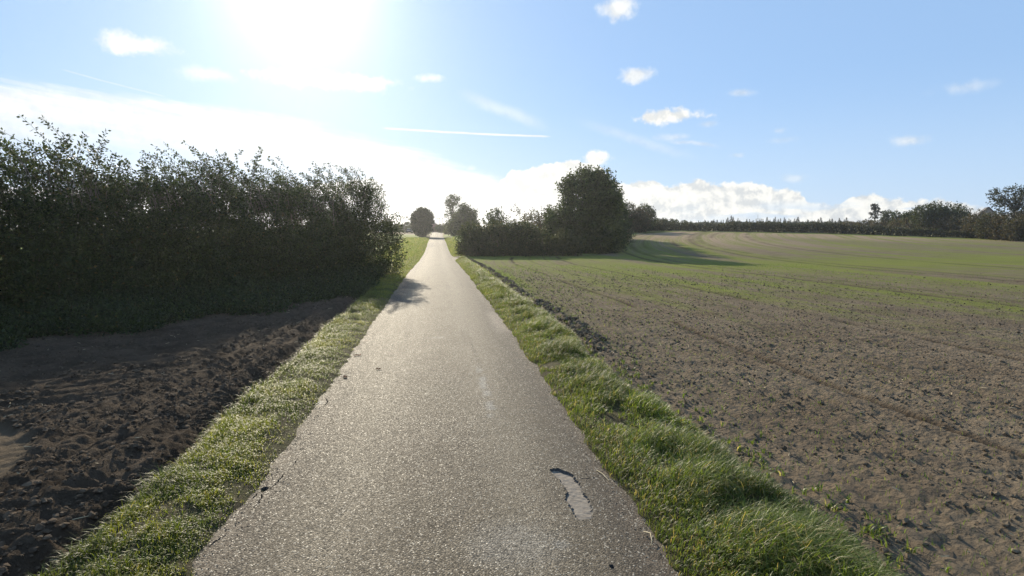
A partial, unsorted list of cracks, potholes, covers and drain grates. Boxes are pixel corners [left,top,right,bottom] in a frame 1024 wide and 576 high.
pothole [549,468,594,521]
